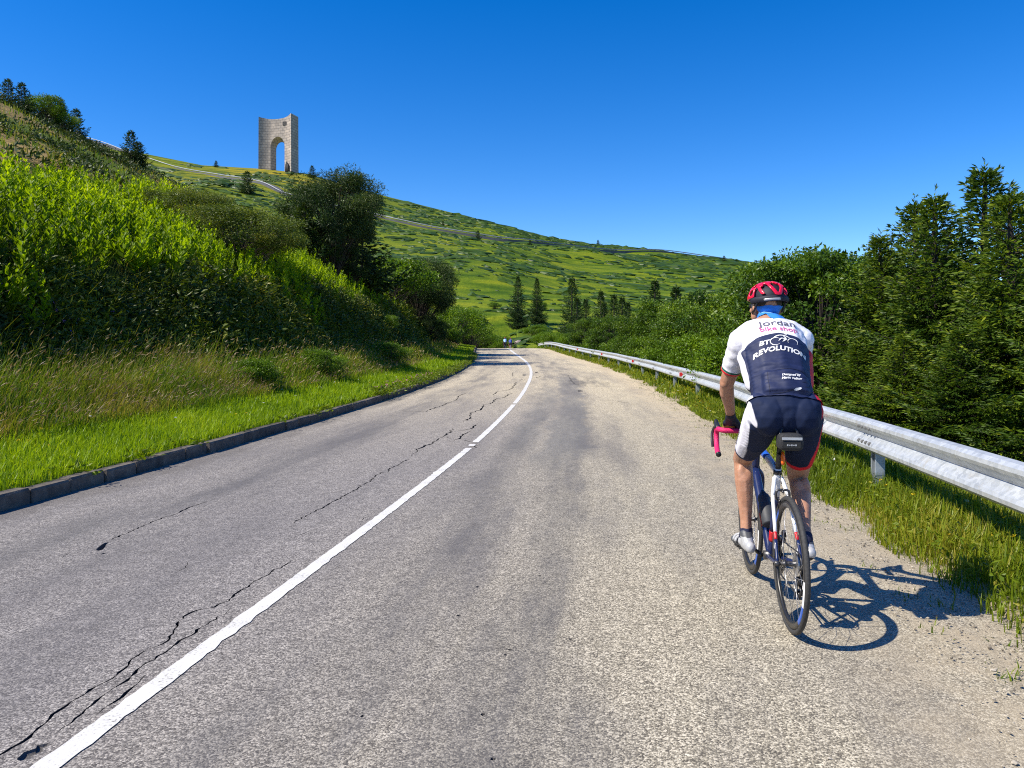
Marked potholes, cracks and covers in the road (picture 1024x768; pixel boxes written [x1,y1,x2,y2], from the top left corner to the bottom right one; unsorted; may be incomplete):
pothole [17,743,52,761]
crack [0,561,291,755]
crack [112,502,205,539]
crack [294,374,517,536]
